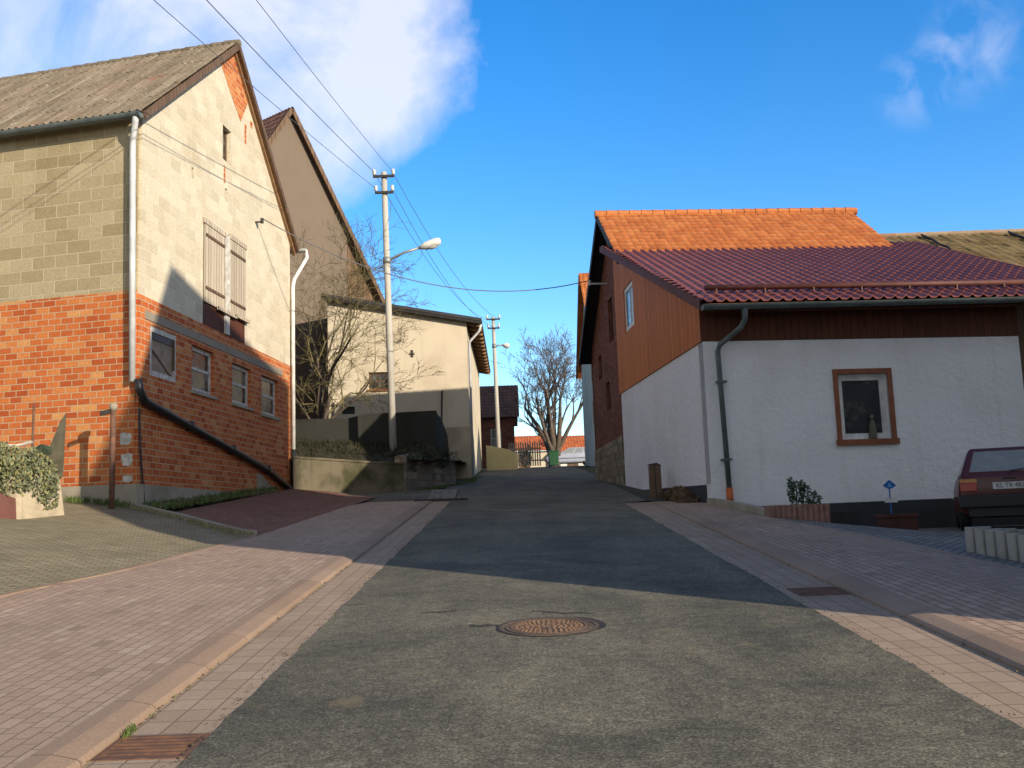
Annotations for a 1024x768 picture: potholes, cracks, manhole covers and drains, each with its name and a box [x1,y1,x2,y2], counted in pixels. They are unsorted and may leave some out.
drain grate [90,733,210,762]
manhole cover [496,617,606,637]
drain grate [786,586,852,596]
